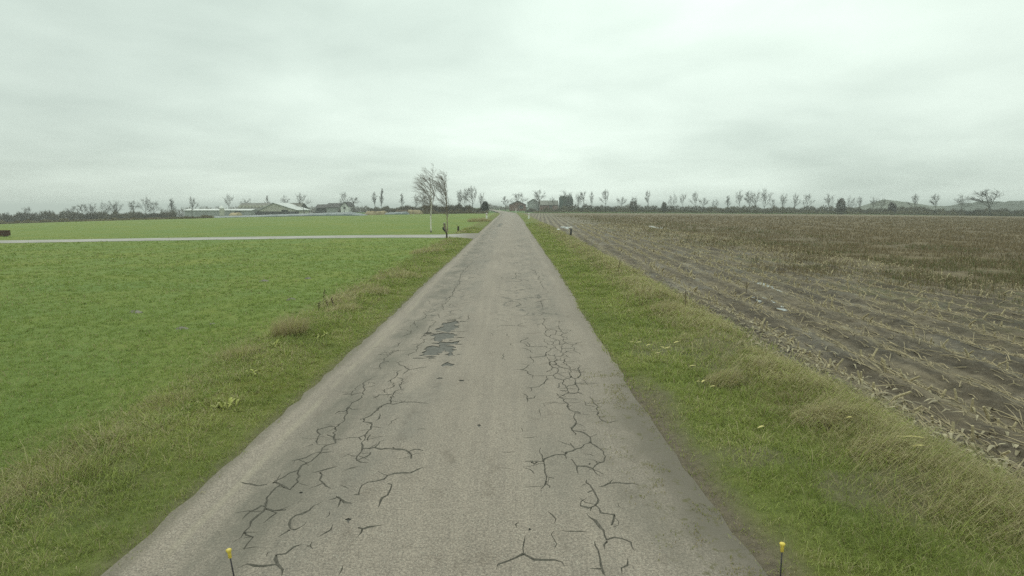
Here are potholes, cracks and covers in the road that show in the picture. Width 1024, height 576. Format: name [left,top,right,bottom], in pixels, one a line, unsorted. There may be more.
crack [238,264,478,576]
crack [491,272,635,575]
pothole [413,319,464,359]
